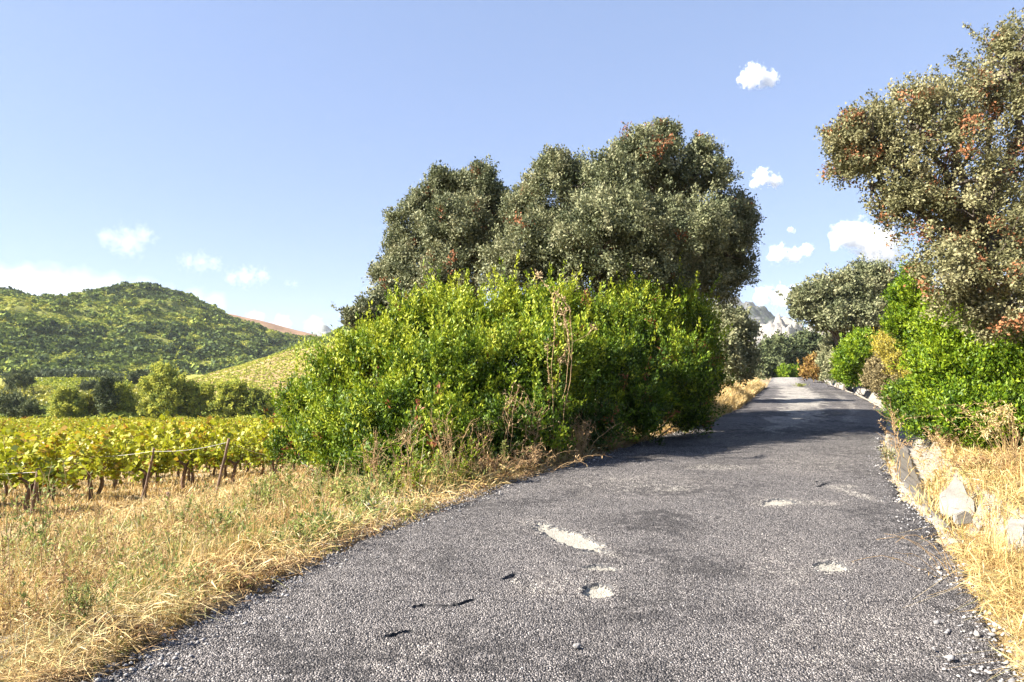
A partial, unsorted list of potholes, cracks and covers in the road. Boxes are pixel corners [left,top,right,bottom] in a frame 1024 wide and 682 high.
pothole [760,498,796,507]
crack [411,598,477,608]
pothole [581,582,614,598]
pothole [526,520,610,553]
pothole [581,564,618,572]
crack [384,629,416,638]
pothole [812,560,852,574]
